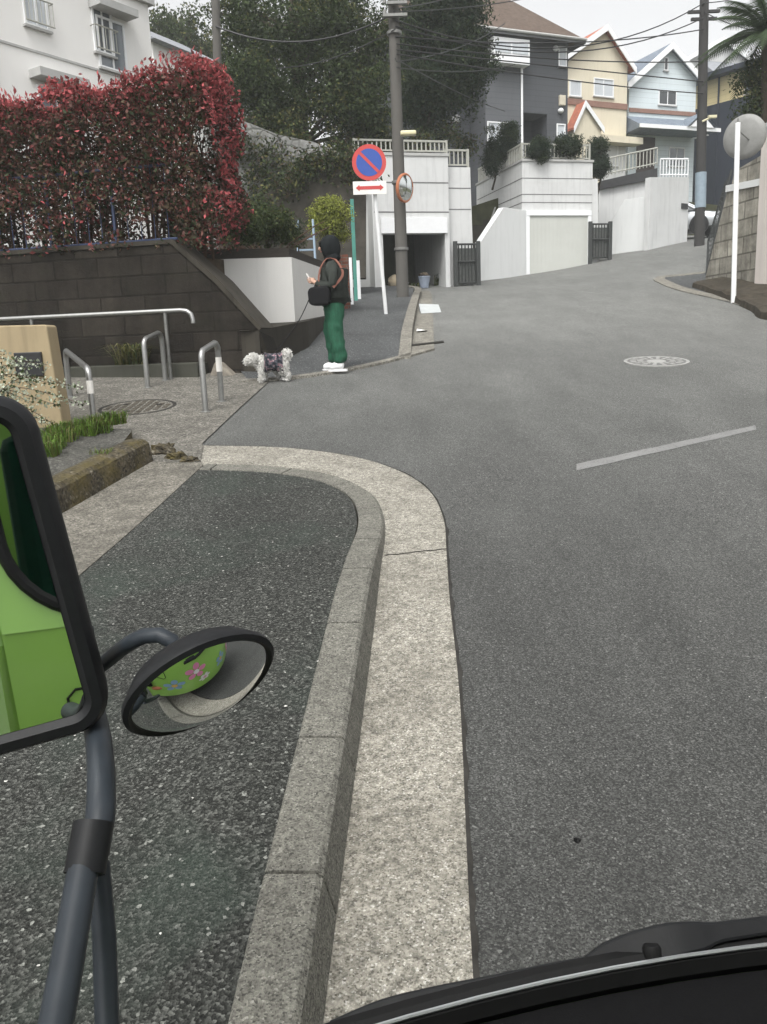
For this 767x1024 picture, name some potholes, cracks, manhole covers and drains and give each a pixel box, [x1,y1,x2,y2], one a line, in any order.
manhole cover [98,399,177,415]
manhole cover [624,356,690,367]
